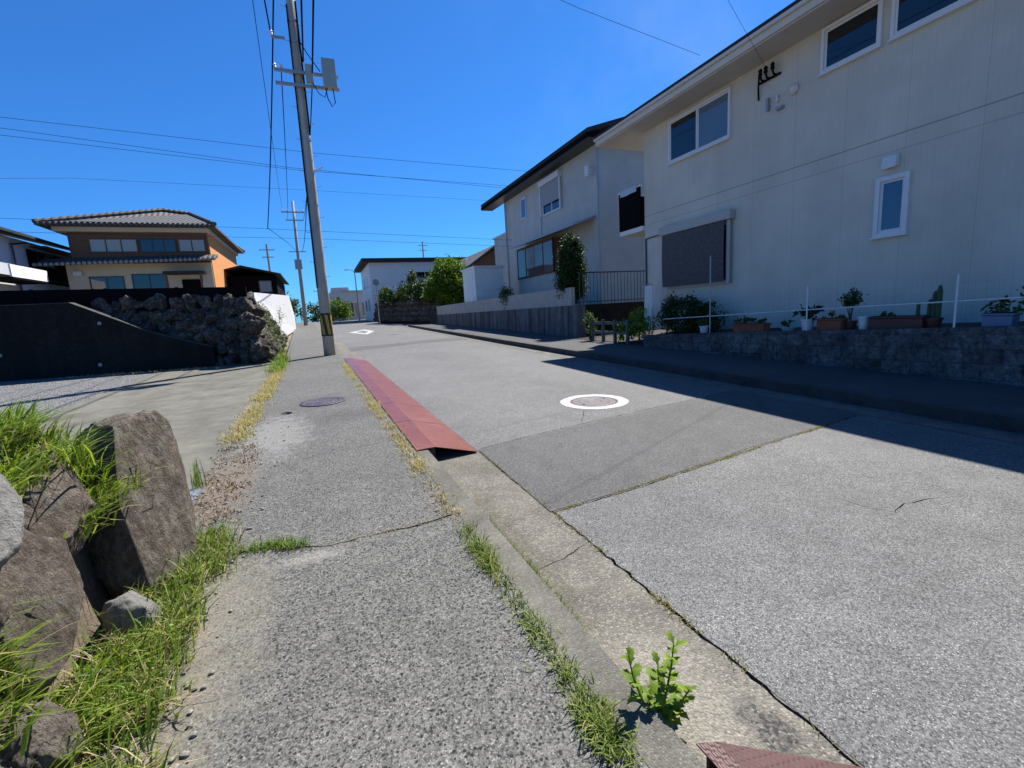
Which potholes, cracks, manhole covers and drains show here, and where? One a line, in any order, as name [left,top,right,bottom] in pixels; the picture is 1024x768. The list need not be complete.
crack [242,515,451,553]
manhole cover [560,394,628,409]
manhole cover [299,397,345,407]
